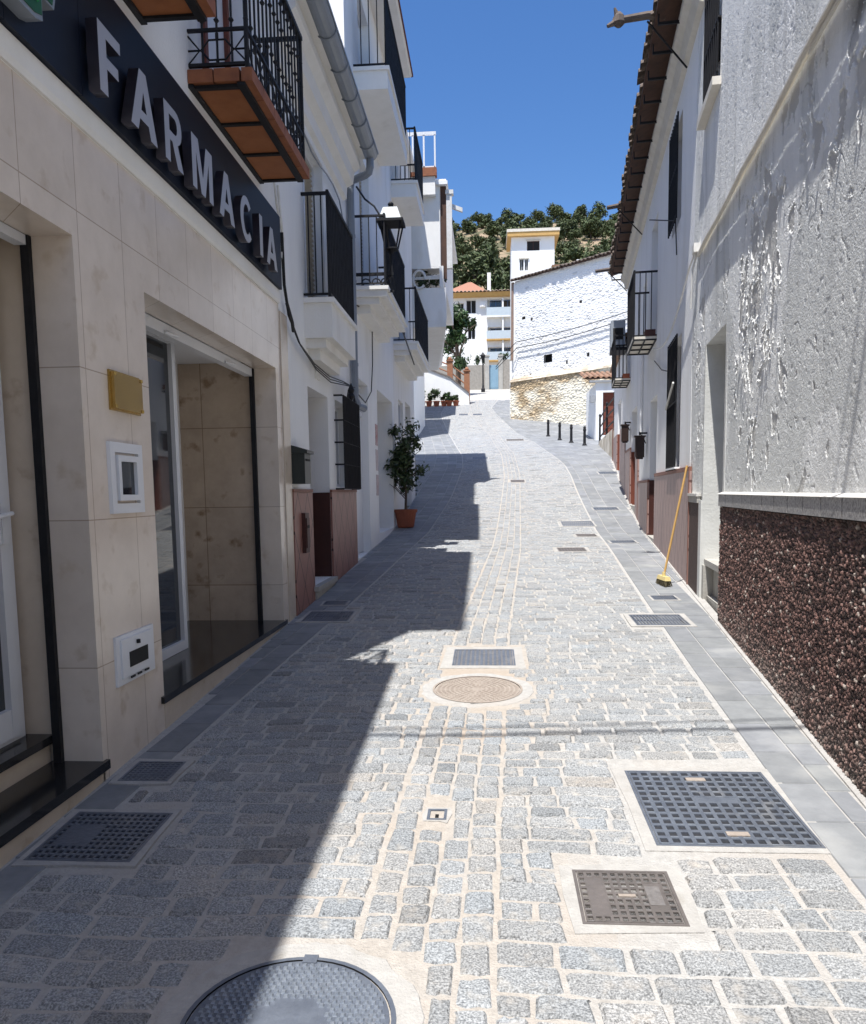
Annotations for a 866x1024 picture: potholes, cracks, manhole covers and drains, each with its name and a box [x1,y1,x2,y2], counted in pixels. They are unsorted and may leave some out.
manhole cover [155,942,425,1024]
manhole cover [421,673,534,708]
manhole cover [422,807,452,824]
manhole cover [559,864,705,935]
drain grate [294,610,360,623]
drain grate [623,613,698,628]
